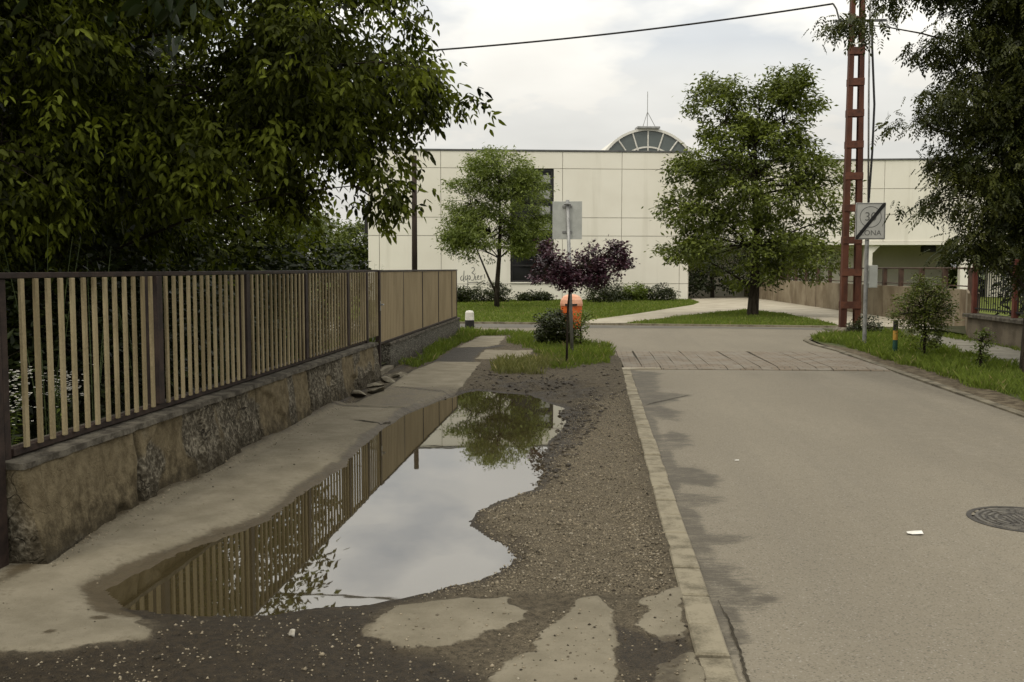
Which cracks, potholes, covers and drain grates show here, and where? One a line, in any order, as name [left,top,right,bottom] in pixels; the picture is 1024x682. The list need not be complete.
crack [718,601,750,682]
pothole [89,389,573,620]
manhole cover [966,506,1024,532]
